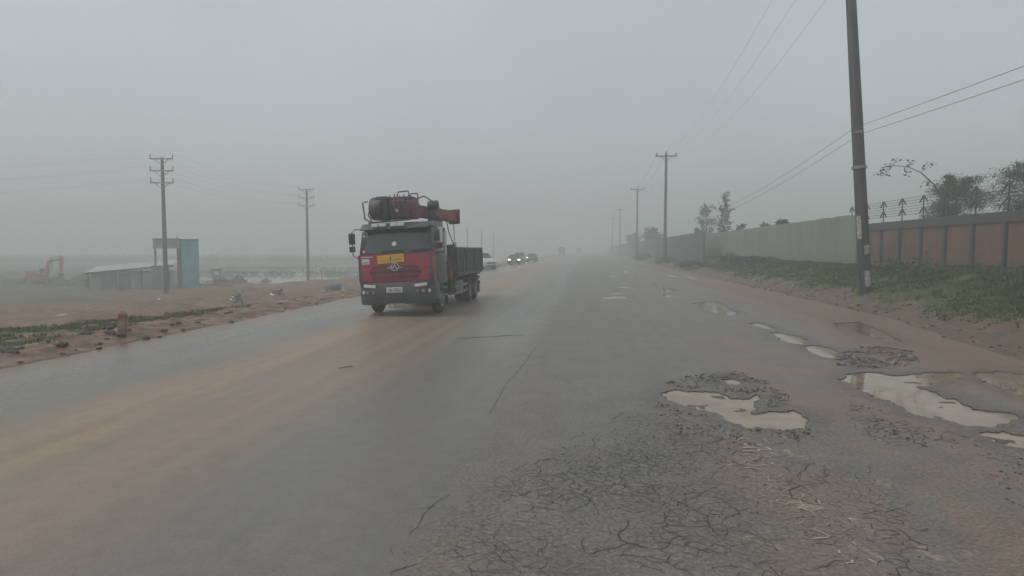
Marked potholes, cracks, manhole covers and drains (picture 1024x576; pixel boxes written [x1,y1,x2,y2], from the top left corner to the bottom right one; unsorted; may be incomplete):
crack [843,400,967,448]
crack [390,402,936,576]
pothole [769,332,808,344]
pothole [661,389,809,430]
pothole [834,322,902,344]
pothole [803,345,839,358]
pothole [837,372,1020,427]
pothole [979,431,1024,448]
pothole [691,302,738,316]
